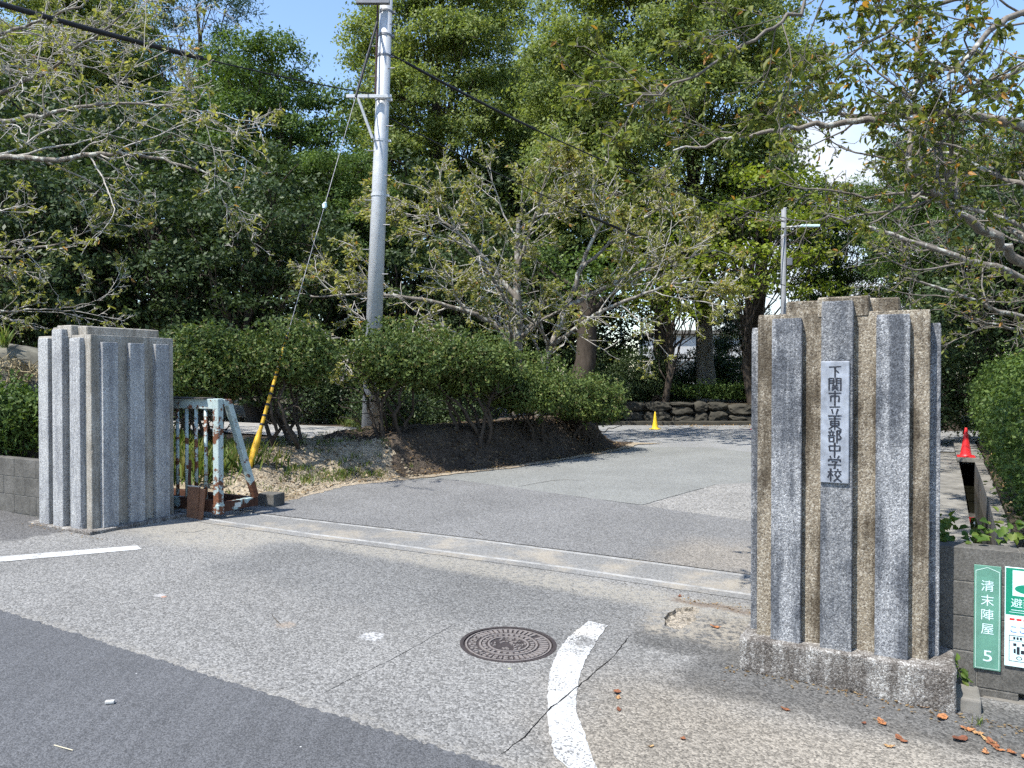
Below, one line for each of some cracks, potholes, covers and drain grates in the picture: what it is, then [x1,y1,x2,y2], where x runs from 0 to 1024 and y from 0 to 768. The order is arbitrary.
manhole cover [460,626,557,663]
crack [496,636,630,758]
pothole [664,607,700,629]
crack [304,619,463,701]
